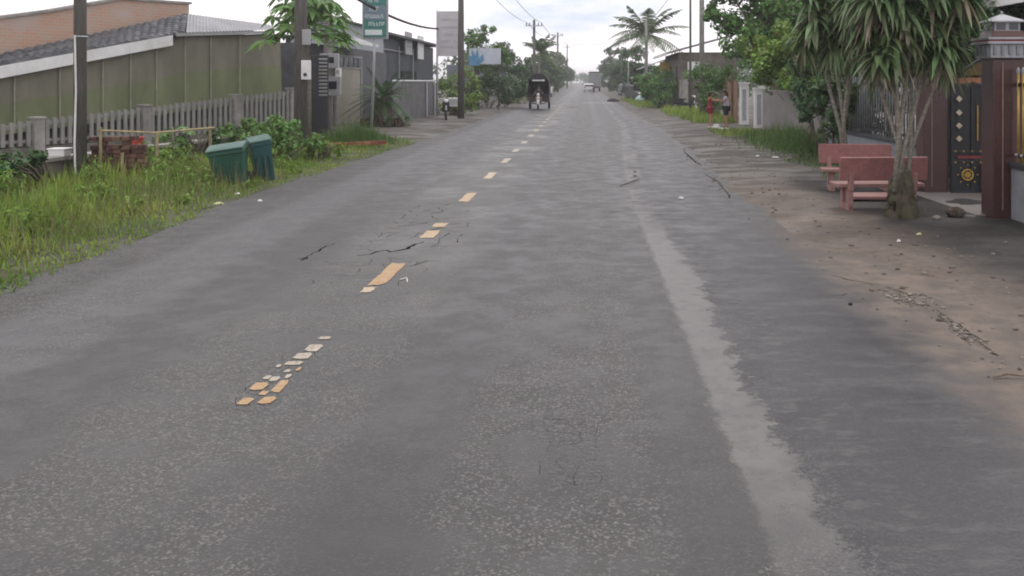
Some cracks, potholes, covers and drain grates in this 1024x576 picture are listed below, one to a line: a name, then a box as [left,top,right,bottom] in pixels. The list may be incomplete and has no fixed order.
crack [299,203,486,286]
crack [539,414,602,485]
